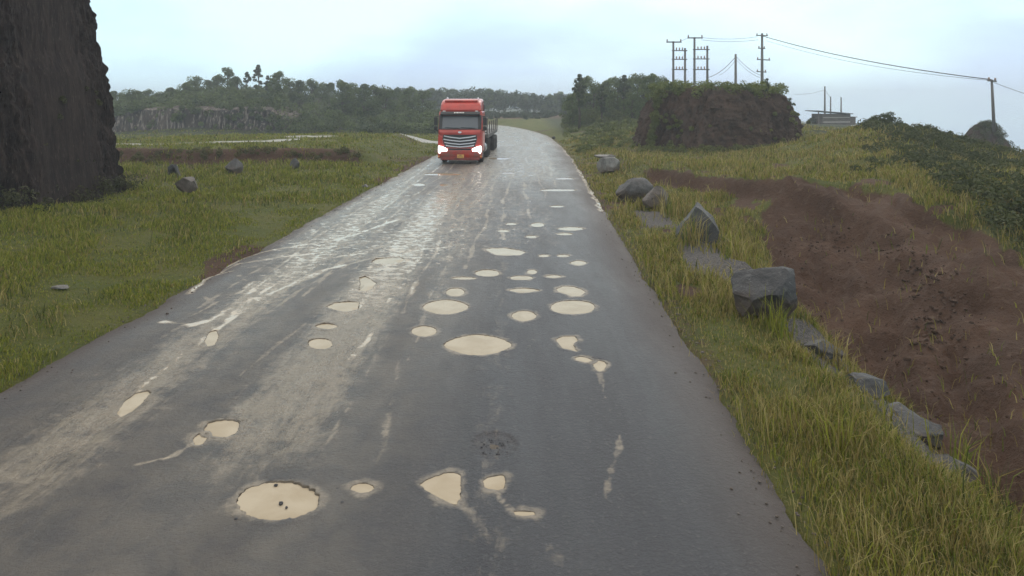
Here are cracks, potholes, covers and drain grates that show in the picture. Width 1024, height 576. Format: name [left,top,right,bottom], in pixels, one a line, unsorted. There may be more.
pothole [545,299,600,316]
pothole [405,324,443,339]
pothole [471,269,503,277]
pothole [225,475,344,526]
pothole [198,418,245,439]
pothole [321,299,365,313]
pothole [589,359,610,373]
pothole [107,387,160,420]
pothole [550,334,584,353]
pothole [571,355,598,364]
pothole [340,477,385,499]
pothole [301,336,339,351]
